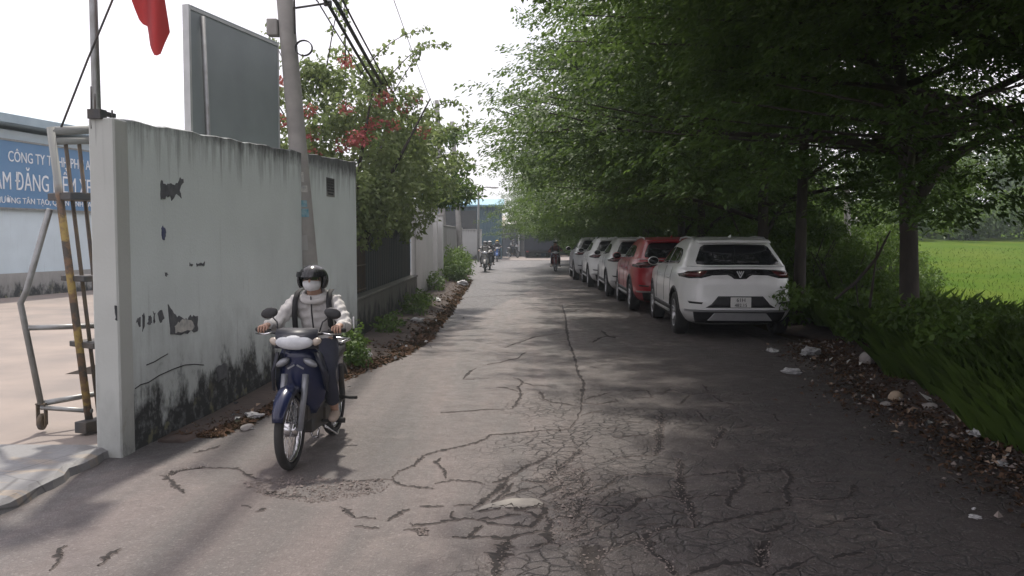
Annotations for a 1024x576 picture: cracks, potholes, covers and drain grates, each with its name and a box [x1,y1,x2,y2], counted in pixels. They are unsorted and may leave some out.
crack [97,548,122,566]
crack [50,545,68,570]
crack [339,293,893,576]
crack [159,445,305,512]
